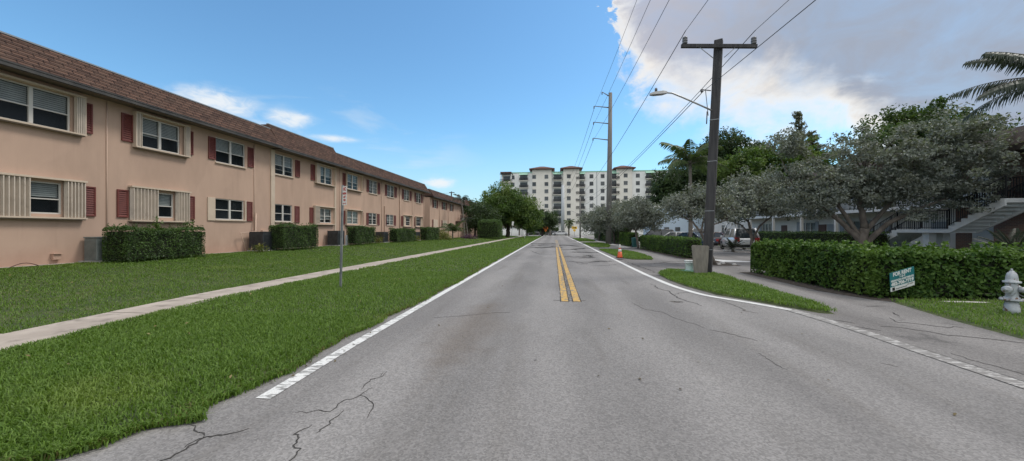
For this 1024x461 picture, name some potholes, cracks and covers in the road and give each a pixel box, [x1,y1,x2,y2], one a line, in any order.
crack [289,376,382,461]
crack [160,424,249,461]
crack [530,243,785,369]
